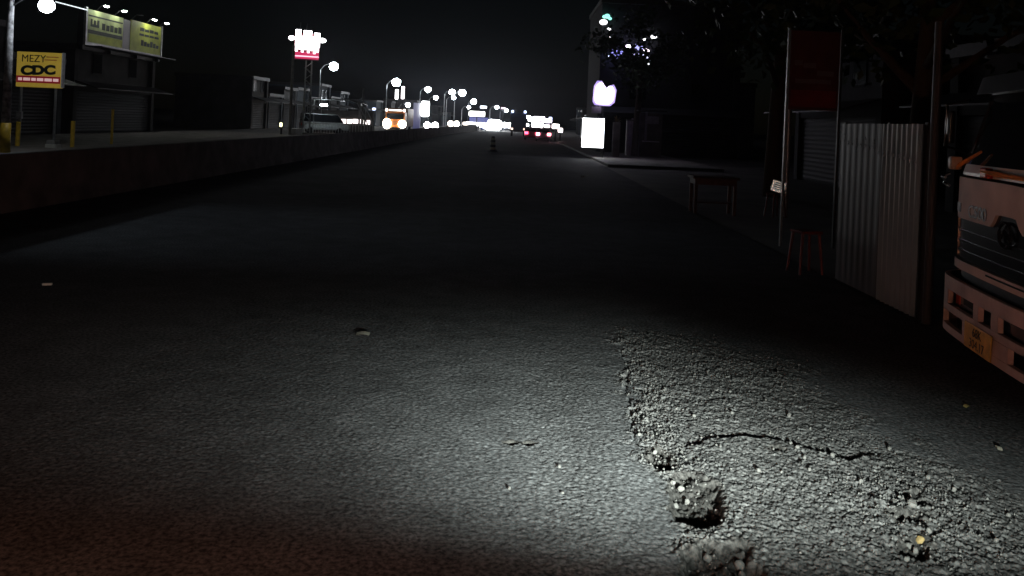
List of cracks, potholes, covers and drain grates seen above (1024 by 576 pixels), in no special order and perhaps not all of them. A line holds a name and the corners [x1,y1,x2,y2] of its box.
pothole [665,470,732,530]
pothole [677,535,770,576]
pothole [902,481,935,508]
crack [616,338,886,462]
pothole [881,505,933,526]
pothole [896,532,939,563]
